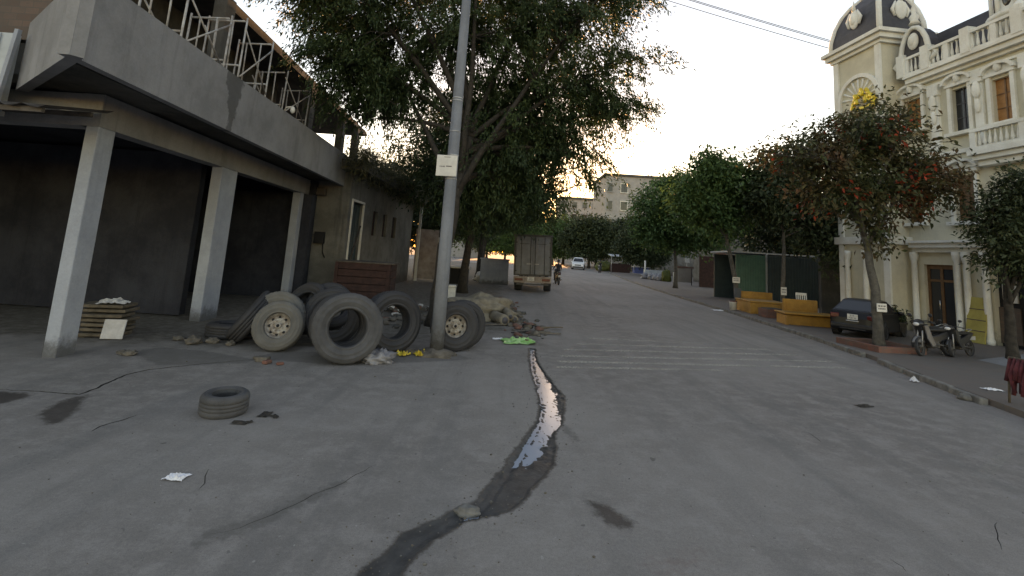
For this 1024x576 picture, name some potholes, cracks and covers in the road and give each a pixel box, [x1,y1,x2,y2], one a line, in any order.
crack [213,465,374,534]
crack [11,359,253,395]
